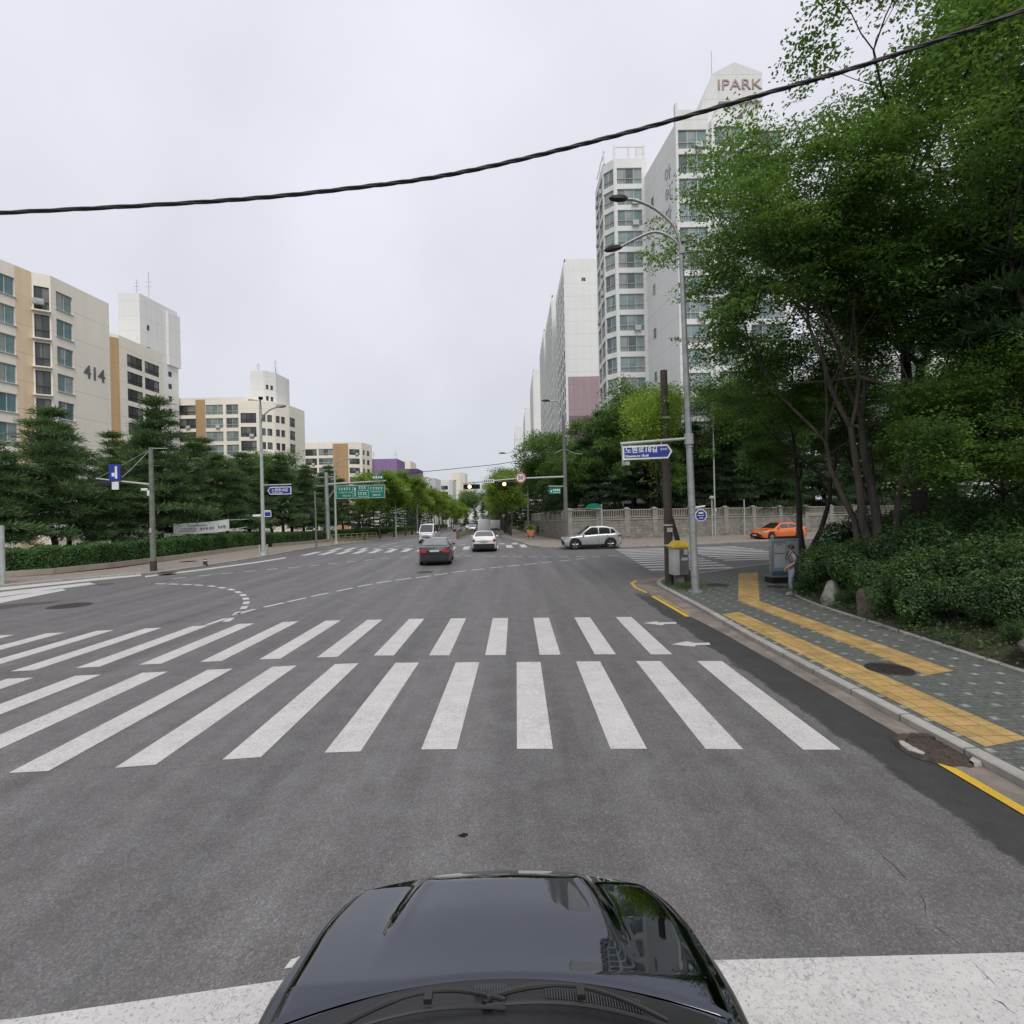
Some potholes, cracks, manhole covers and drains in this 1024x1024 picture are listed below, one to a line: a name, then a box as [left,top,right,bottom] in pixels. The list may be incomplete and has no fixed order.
crack [825,802,1006,1007]
manhole cover [864,662,916,676]
